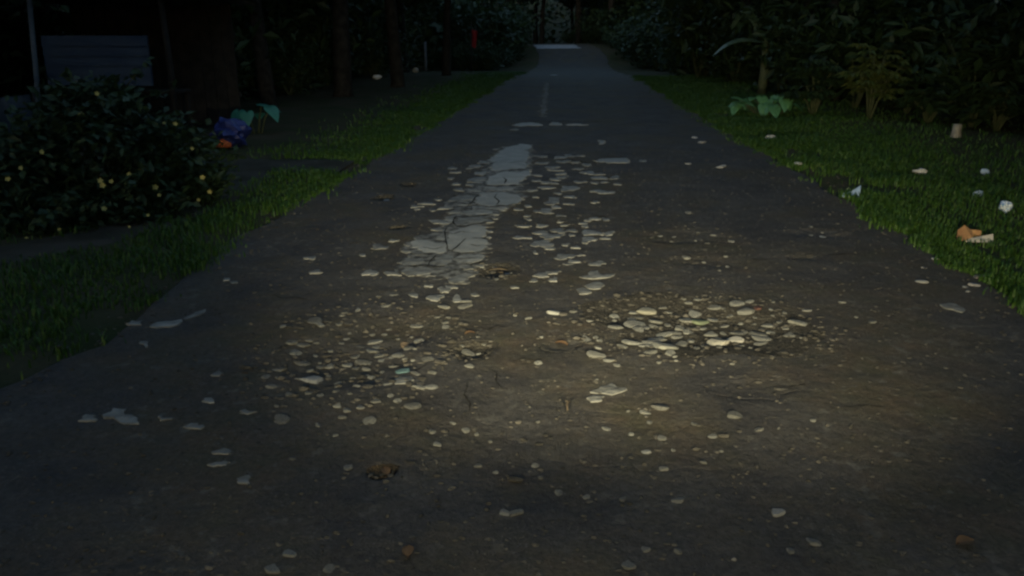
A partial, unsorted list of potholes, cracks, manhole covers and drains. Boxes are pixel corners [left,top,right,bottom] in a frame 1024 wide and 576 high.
crack [412,161,522,270]
pothole [366,464,398,479]
pothole [479,263,522,278]
pothole [581,292,827,358]
